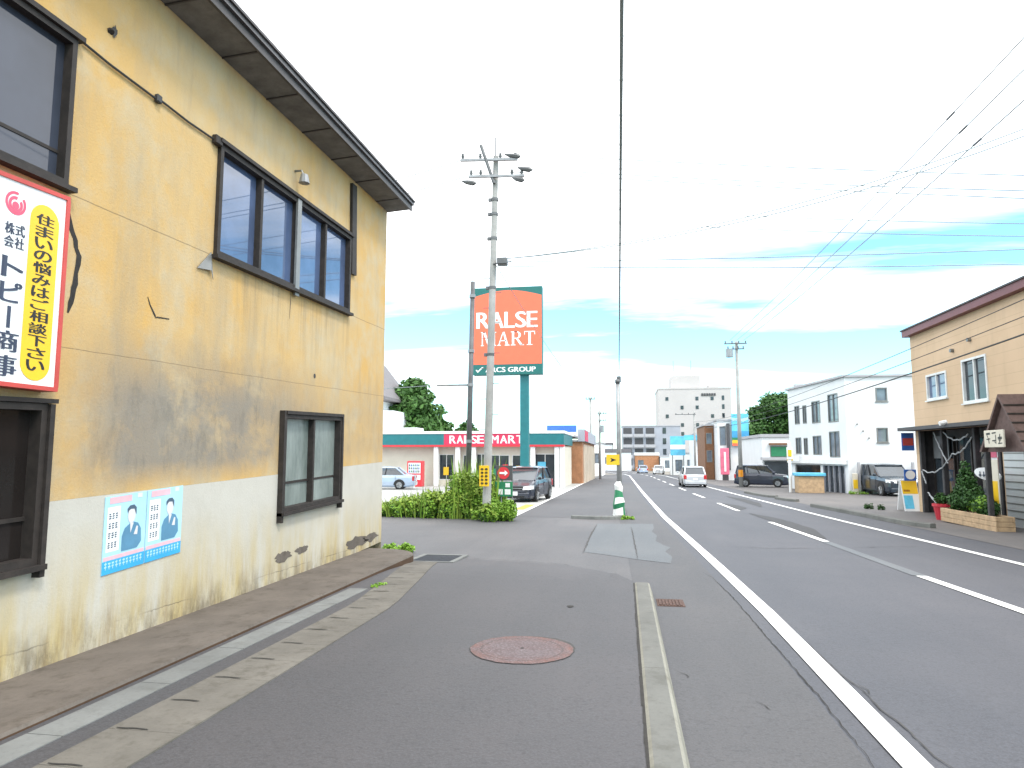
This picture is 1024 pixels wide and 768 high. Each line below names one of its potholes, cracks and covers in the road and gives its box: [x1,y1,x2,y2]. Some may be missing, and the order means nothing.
crack [806,641,953,768]
manhole cover [469,636,575,664]
